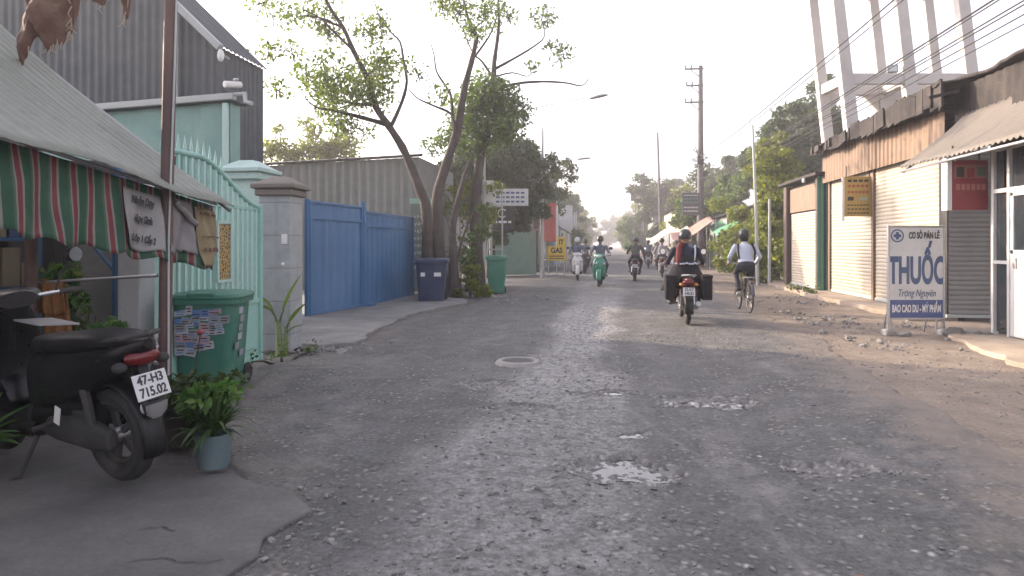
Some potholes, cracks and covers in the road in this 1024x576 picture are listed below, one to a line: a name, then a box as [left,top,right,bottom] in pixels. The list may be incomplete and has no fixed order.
pothole [613,430,654,439]
manhole cover [494,356,542,368]
pothole [563,452,691,491]
pothole [777,458,903,479]
pothole [650,393,760,411]
